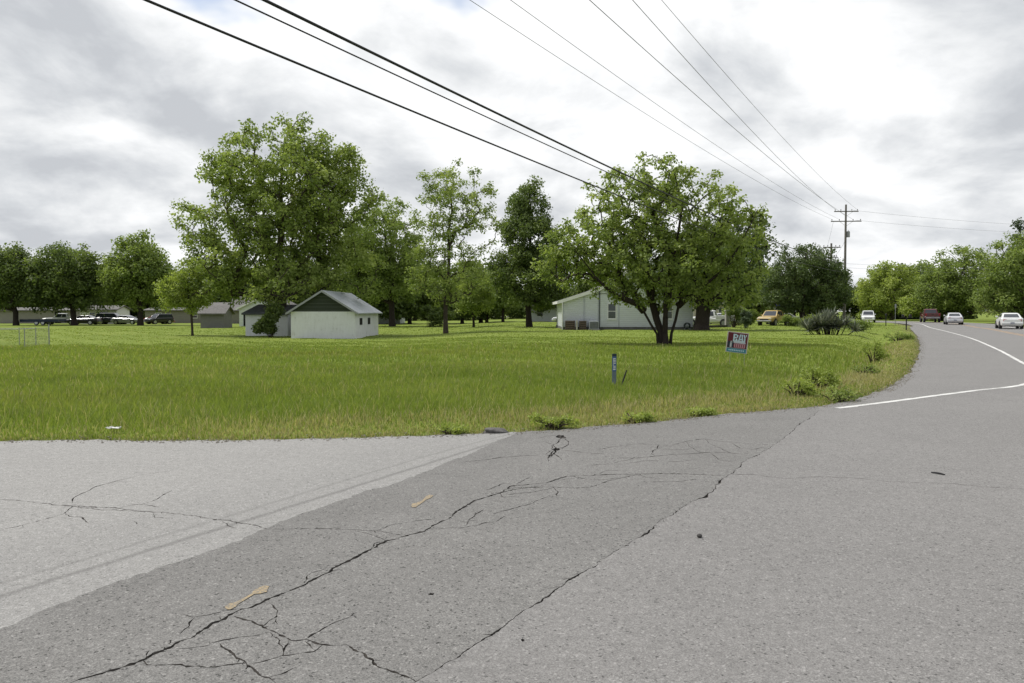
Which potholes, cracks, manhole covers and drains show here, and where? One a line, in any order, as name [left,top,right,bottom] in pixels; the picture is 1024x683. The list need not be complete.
crack [469,435,769,466]
crack [71,470,725,683]
crack [6,471,266,529]
